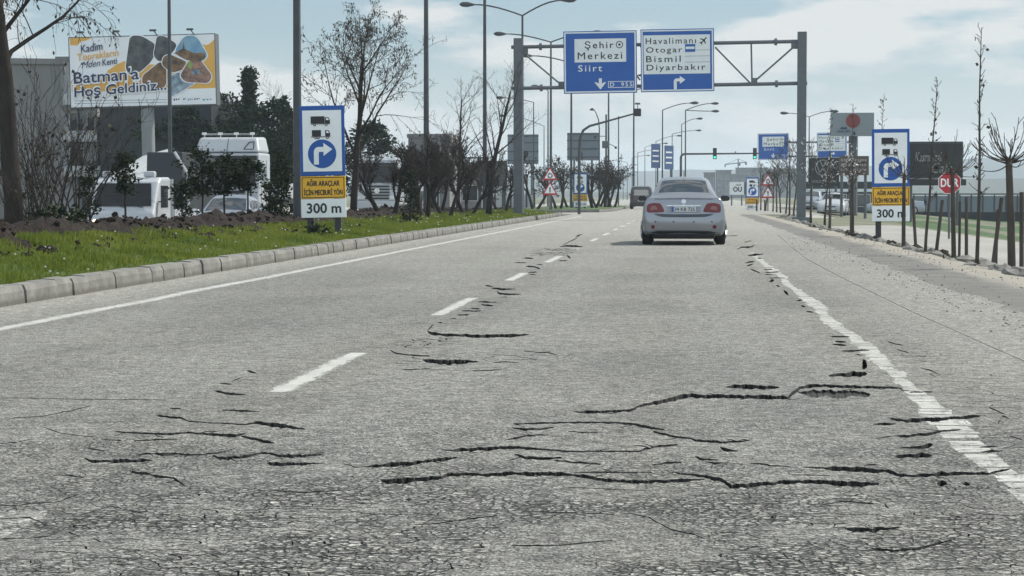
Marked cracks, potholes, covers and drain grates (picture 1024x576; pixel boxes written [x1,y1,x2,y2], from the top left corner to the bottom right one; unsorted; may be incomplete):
crack [0,335,1024,576]
crack [731,235,780,278]
crack [390,234,582,371]
pothole [802,389,870,399]
